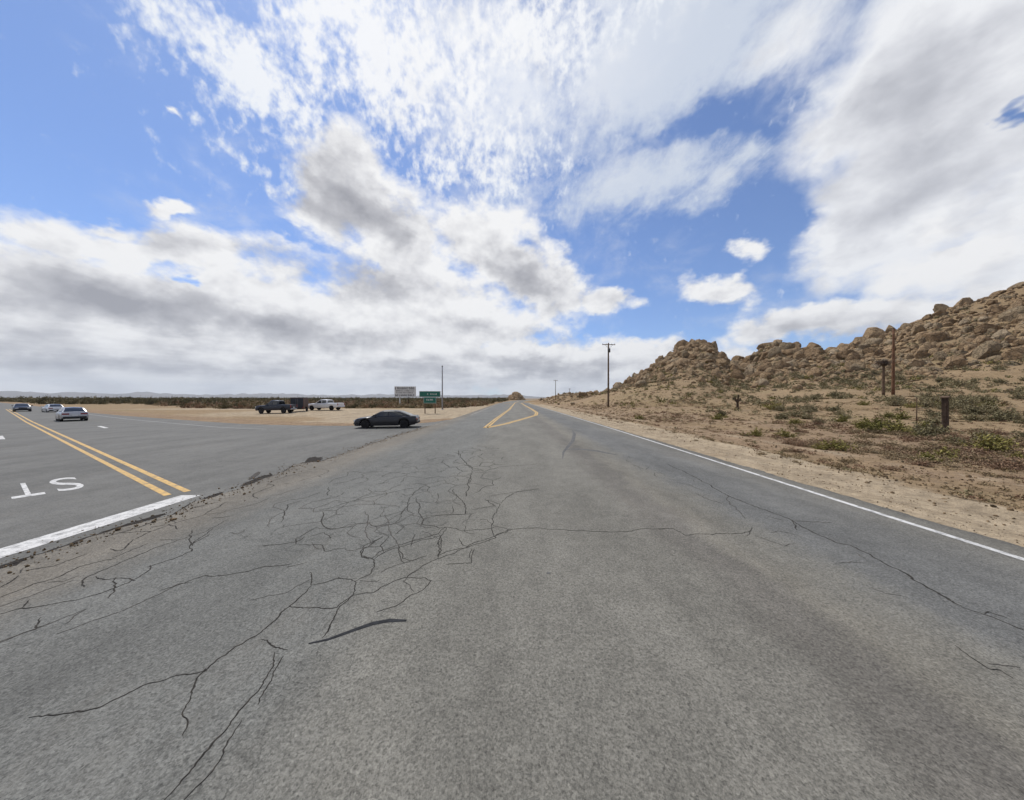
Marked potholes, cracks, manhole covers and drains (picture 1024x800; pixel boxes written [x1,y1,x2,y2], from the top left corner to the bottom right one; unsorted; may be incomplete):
crack [626,460,1024,630]
crack [0,446,693,800]
crack [955,645,1017,678]
